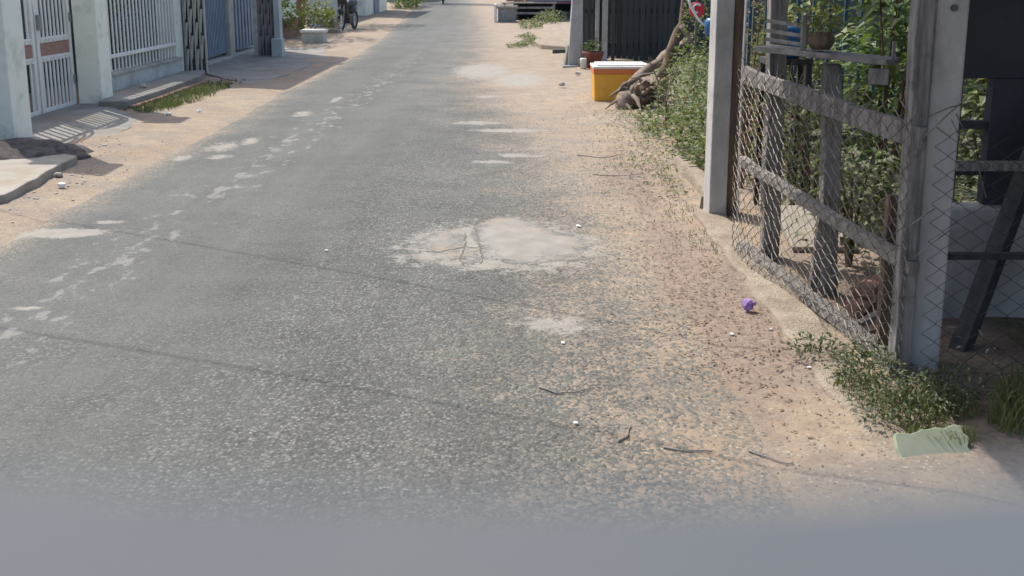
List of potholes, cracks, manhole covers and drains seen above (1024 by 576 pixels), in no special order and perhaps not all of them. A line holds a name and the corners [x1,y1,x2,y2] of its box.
crack [417,227,483,265]
